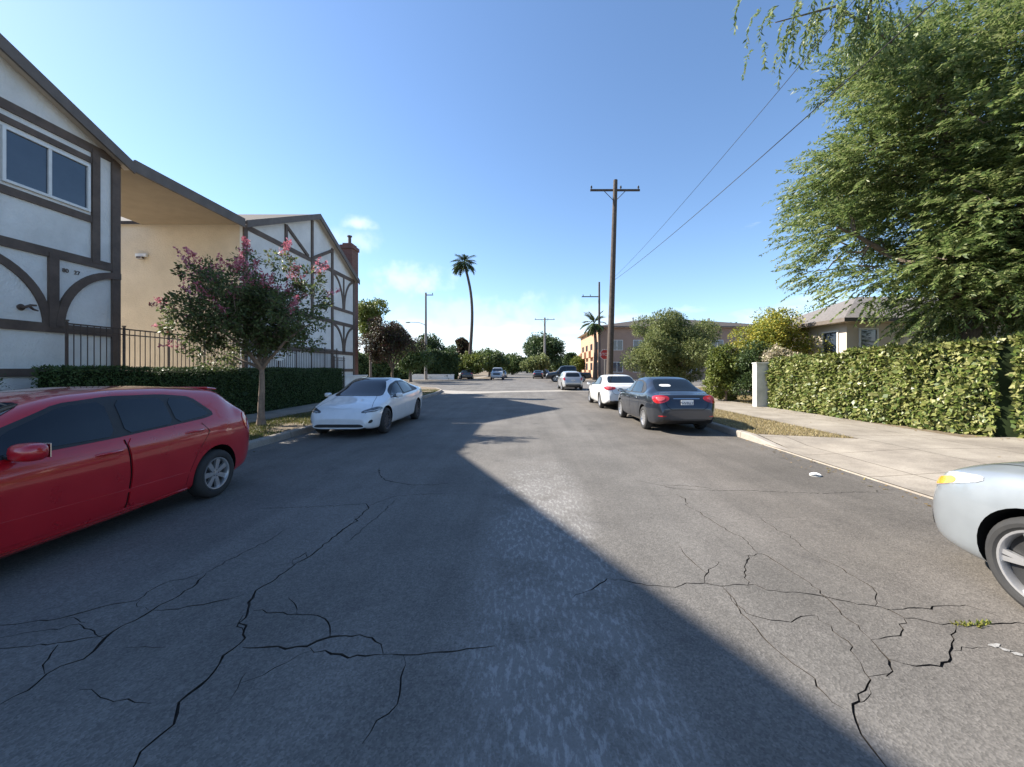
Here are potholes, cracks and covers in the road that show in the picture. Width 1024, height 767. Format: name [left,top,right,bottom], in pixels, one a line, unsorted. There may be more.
crack [0,470,492,767]
crack [646,482,895,494]
crack [576,496,1024,767]
